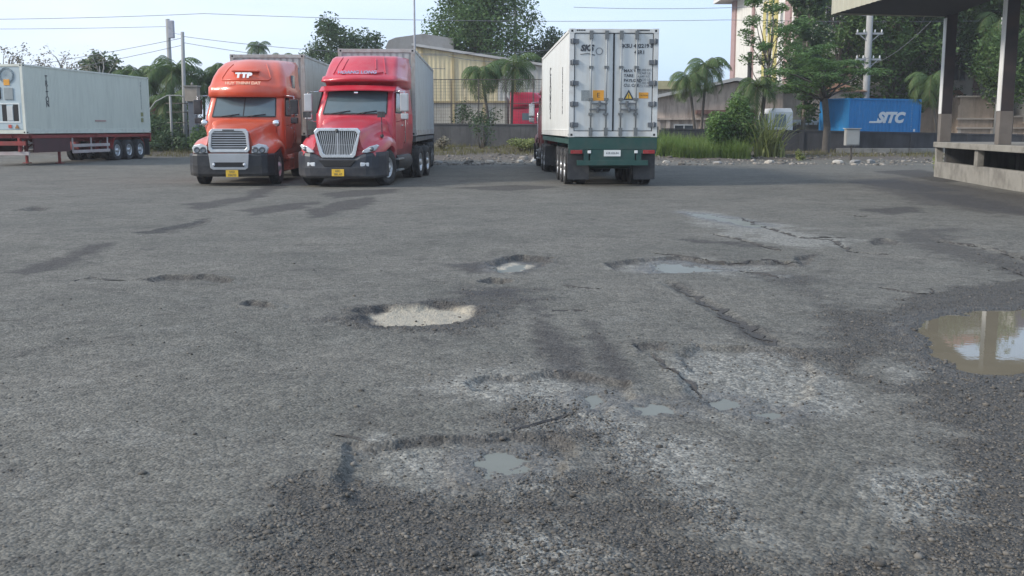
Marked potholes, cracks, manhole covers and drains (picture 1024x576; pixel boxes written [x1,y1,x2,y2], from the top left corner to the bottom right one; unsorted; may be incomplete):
pothole [346,300,490,328]
crack [652,283,780,397]
crack [511,412,574,431]
pothole [143,274,233,285]
crack [655,218,888,278]
pothole [604,256,797,274]
pothole [240,300,277,308]
pothole [485,254,555,272]
